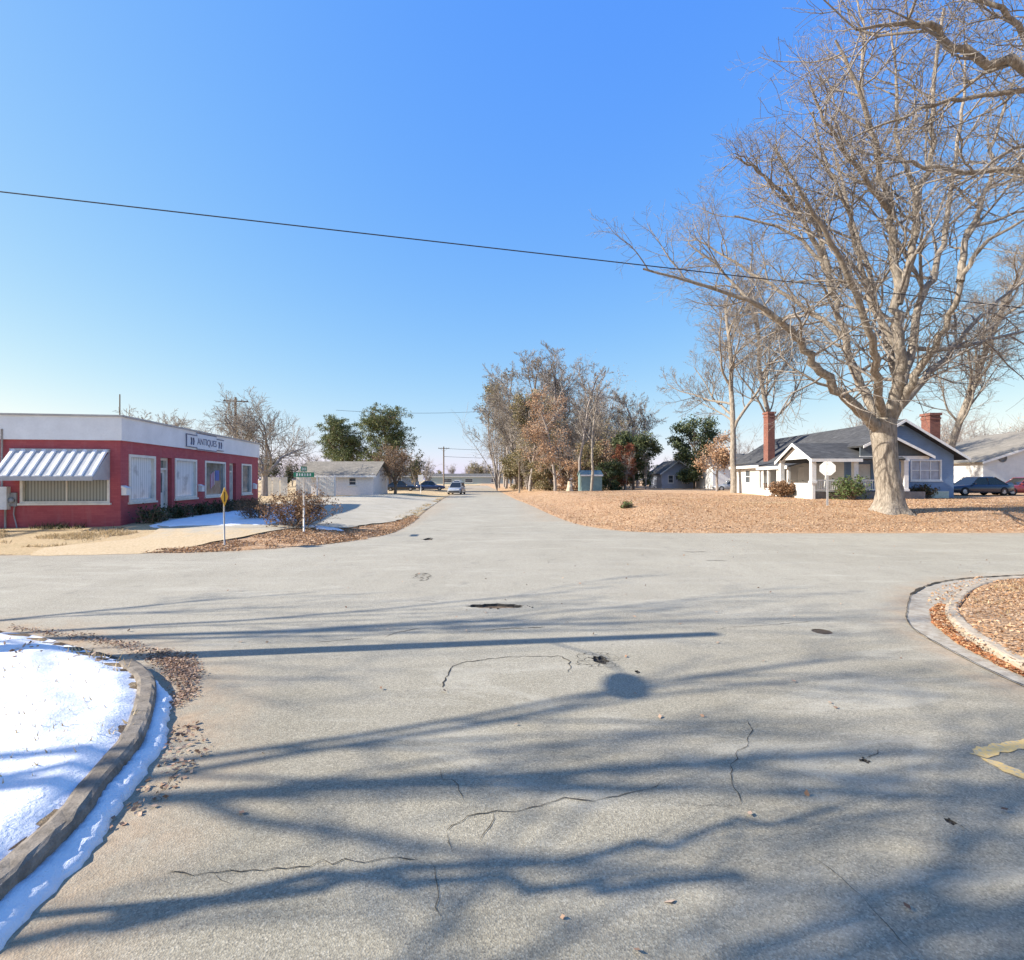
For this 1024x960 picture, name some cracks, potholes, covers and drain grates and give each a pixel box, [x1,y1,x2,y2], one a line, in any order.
crack [442,652,619,687]
crack [803,848,913,952]
crack [441,775,660,851]
crack [167,857,418,884]
crack [673,722,753,807]
